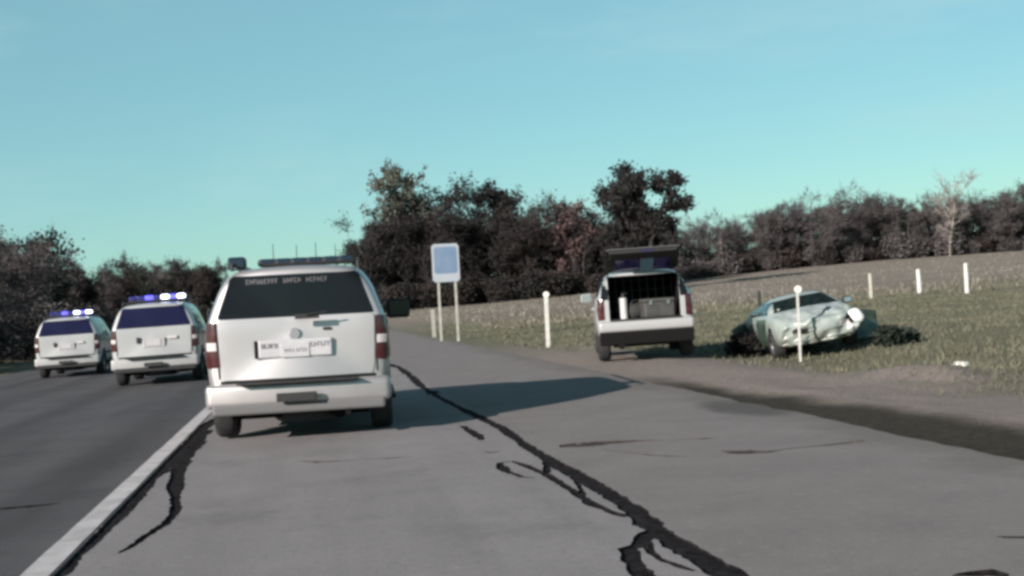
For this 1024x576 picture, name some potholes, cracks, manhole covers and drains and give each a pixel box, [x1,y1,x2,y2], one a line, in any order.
crack [296,364,863,576]
crack [0,419,215,576]
